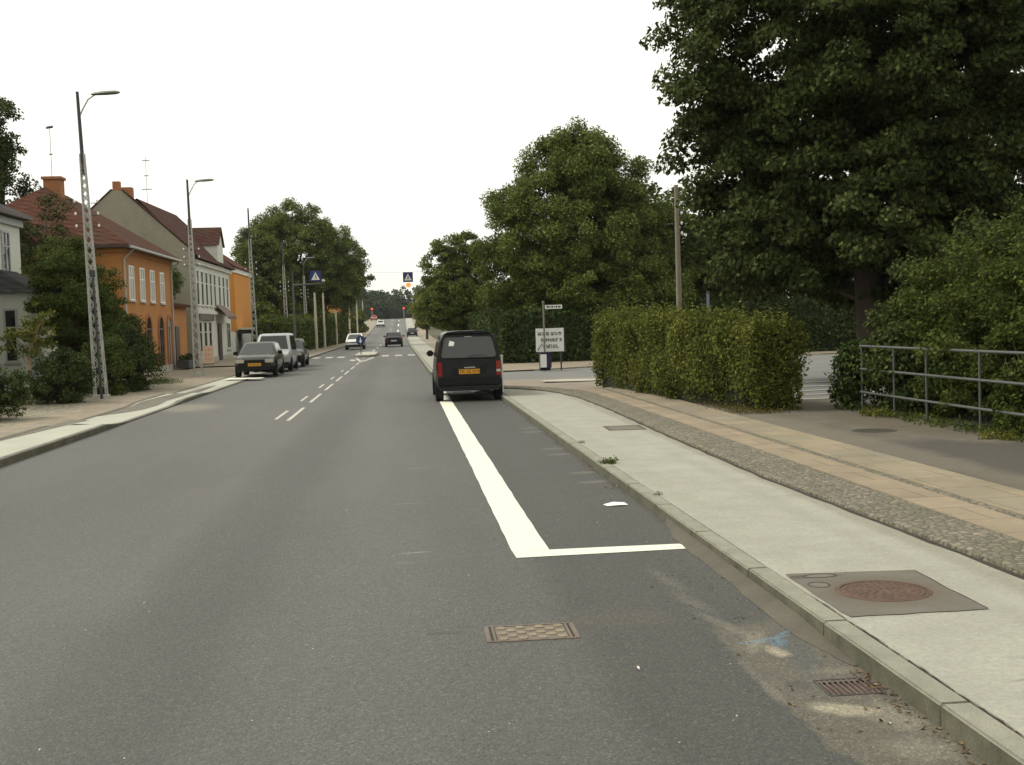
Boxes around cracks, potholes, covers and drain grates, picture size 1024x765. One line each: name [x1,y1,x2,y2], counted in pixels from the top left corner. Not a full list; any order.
manhole cover [834,580,933,602]
manhole cover [483,622,581,643]
drain grate [812,677,886,697]
